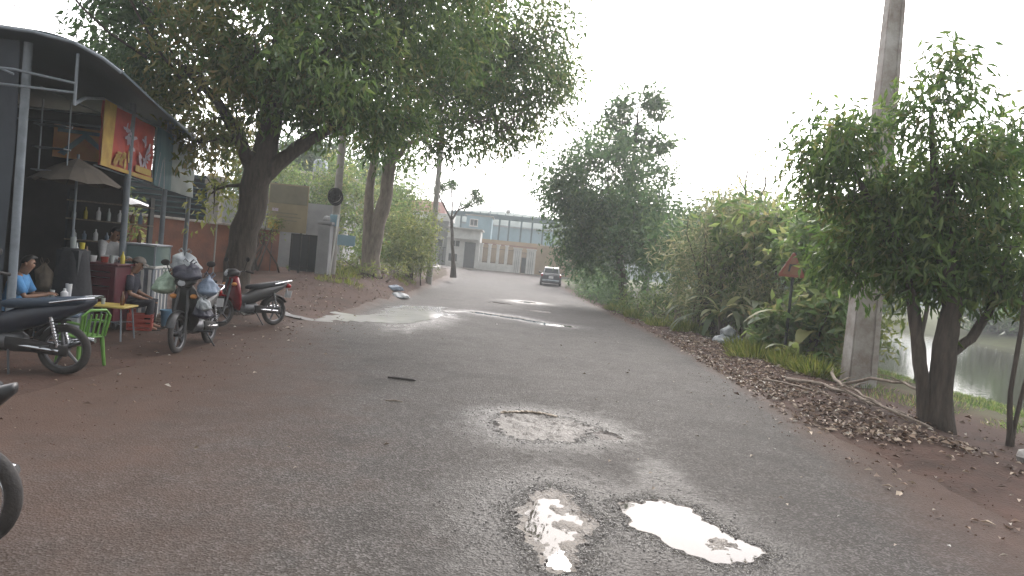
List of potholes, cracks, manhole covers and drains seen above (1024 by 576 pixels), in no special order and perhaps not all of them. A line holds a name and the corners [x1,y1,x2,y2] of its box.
pothole [615,498,769,565]
pothole [509,486,604,574]
pothole [488,410,602,443]
pothole [465,311,573,328]
